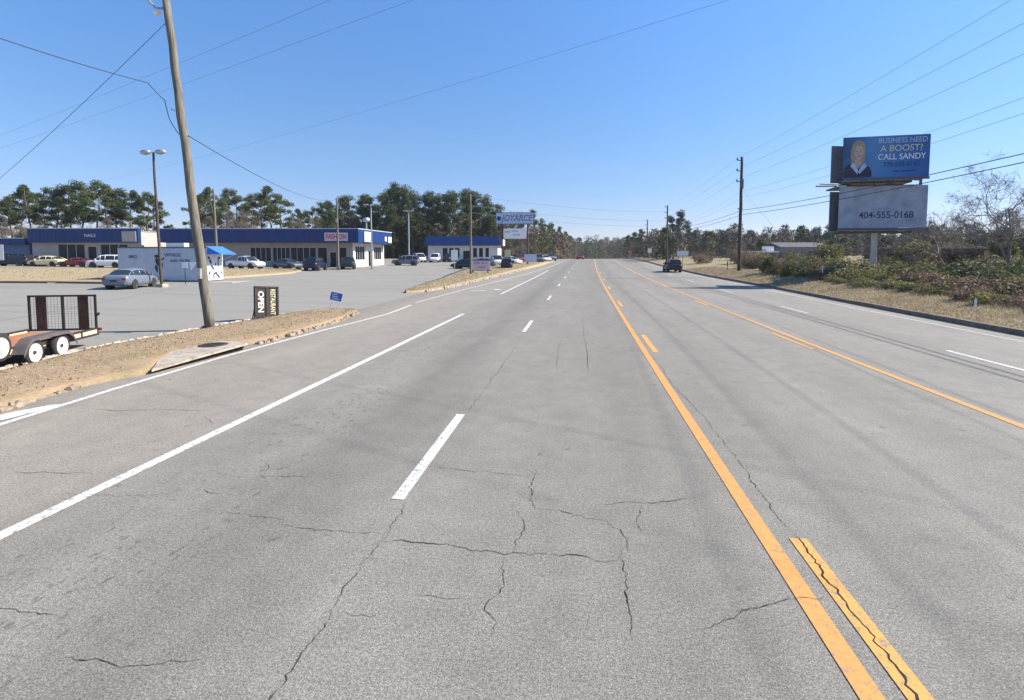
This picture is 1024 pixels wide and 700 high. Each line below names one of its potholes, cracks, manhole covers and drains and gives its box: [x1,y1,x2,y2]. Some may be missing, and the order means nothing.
crack [65,657,229,698]
crack [388,464,684,635]
